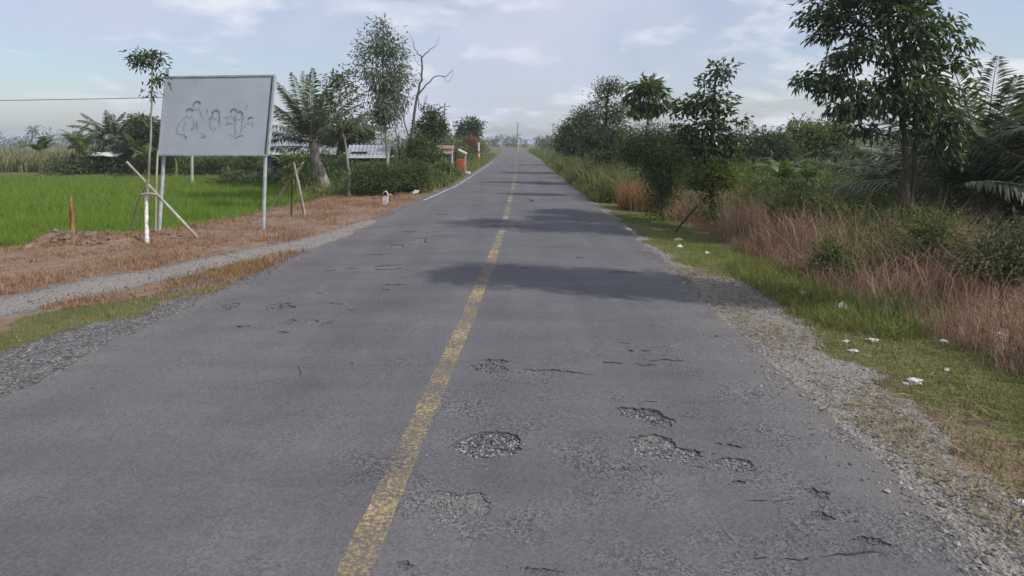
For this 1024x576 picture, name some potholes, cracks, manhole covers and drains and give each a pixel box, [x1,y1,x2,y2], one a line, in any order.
pothole [396,560,415,570]
pothole [256,303,297,312]
pothole [602,403,700,437]
pothole [467,357,520,374]
pothole [212,303,240,312]
pothole [387,482,521,539]
pothole [426,423,544,470]
pothole [688,452,771,477]
pothole [612,422,726,474]
crack [753,551,884,561]
crack [526,342,681,375]
